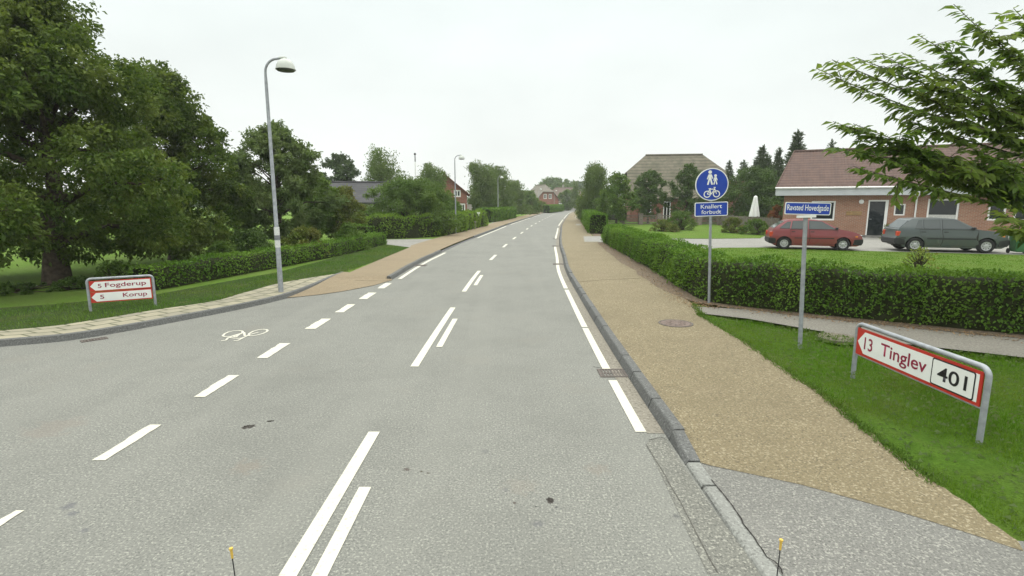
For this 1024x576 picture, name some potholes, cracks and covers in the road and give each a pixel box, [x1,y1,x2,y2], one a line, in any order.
manhole cover [658,319,694,327]
crack [702,479,783,574]
drain grate [597,369,628,377]
